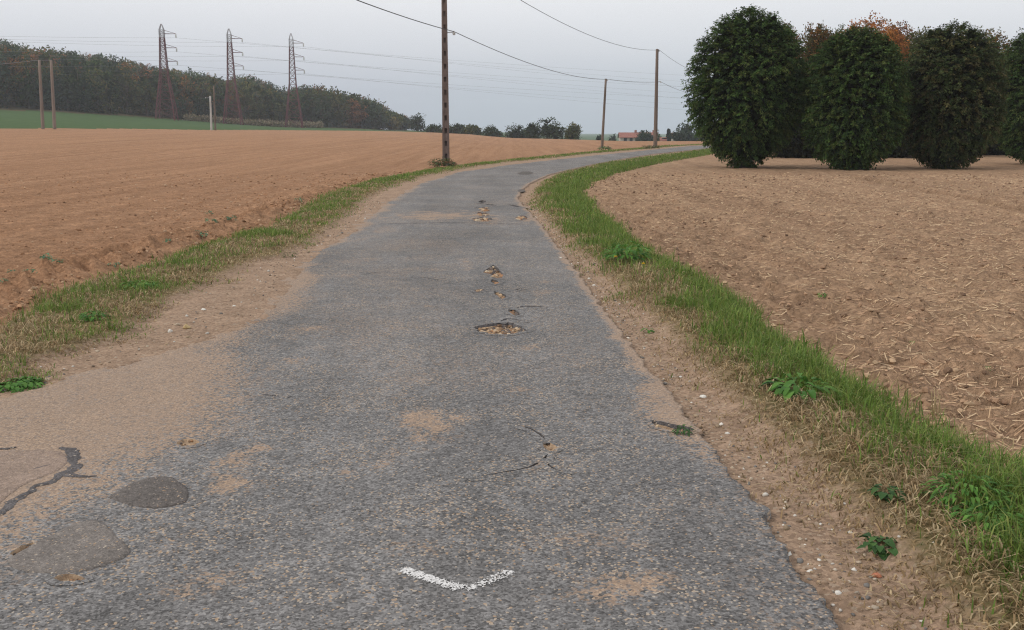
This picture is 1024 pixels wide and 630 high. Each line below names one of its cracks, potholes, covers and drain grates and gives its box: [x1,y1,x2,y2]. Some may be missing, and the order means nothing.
pothole [466,321,533,336]
pothole [477,264,507,279]
pothole [489,290,512,300]
crack [463,422,577,482]
pothole [503,308,525,317]
